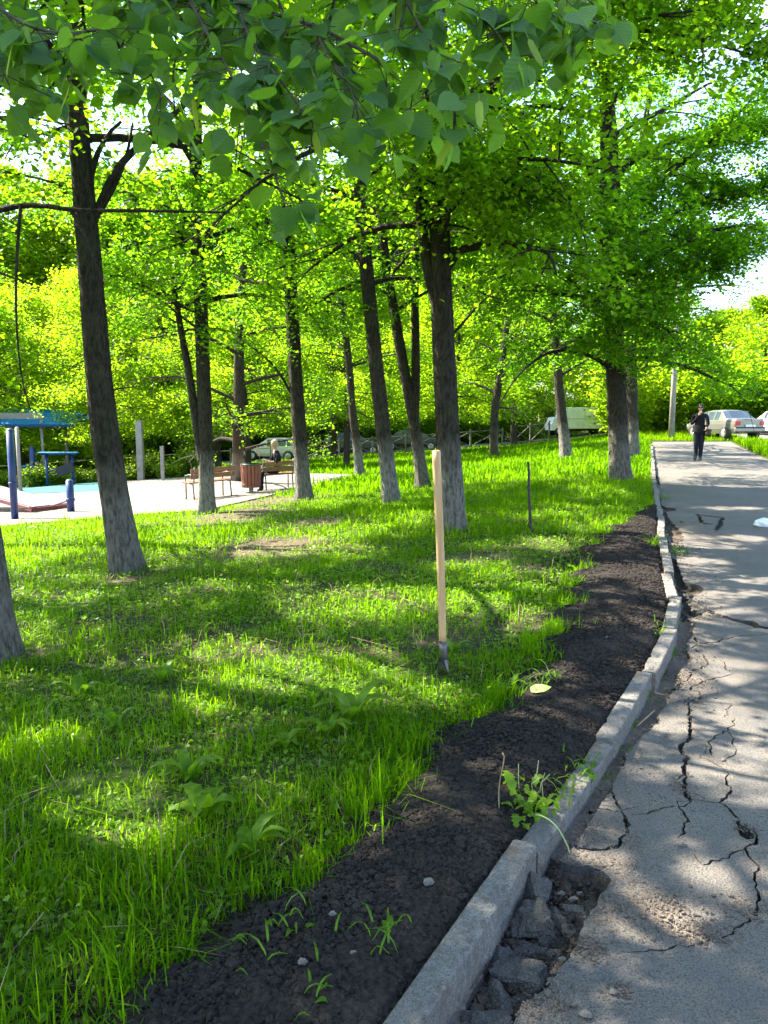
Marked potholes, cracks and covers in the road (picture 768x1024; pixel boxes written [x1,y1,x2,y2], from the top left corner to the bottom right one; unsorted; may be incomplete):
pothole [460,858,611,1024]
crack [575,608,768,953]
crack [696,514,725,531]
